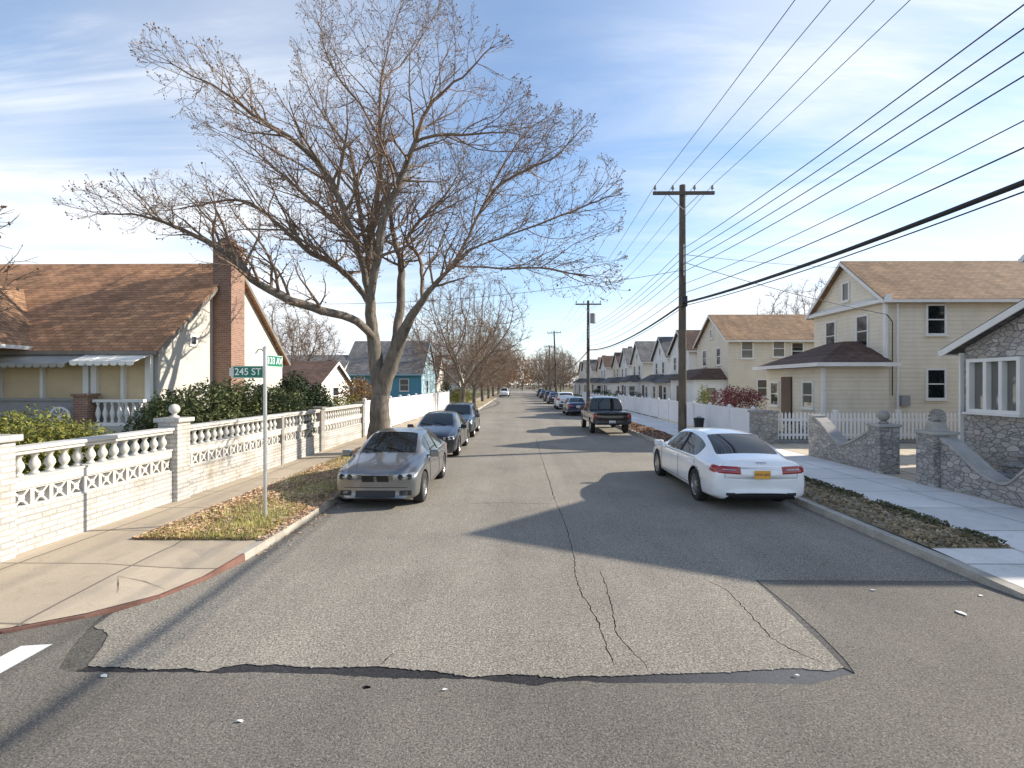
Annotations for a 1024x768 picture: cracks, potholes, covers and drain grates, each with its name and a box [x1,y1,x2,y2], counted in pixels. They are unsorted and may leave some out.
crack [75,441,855,686]
